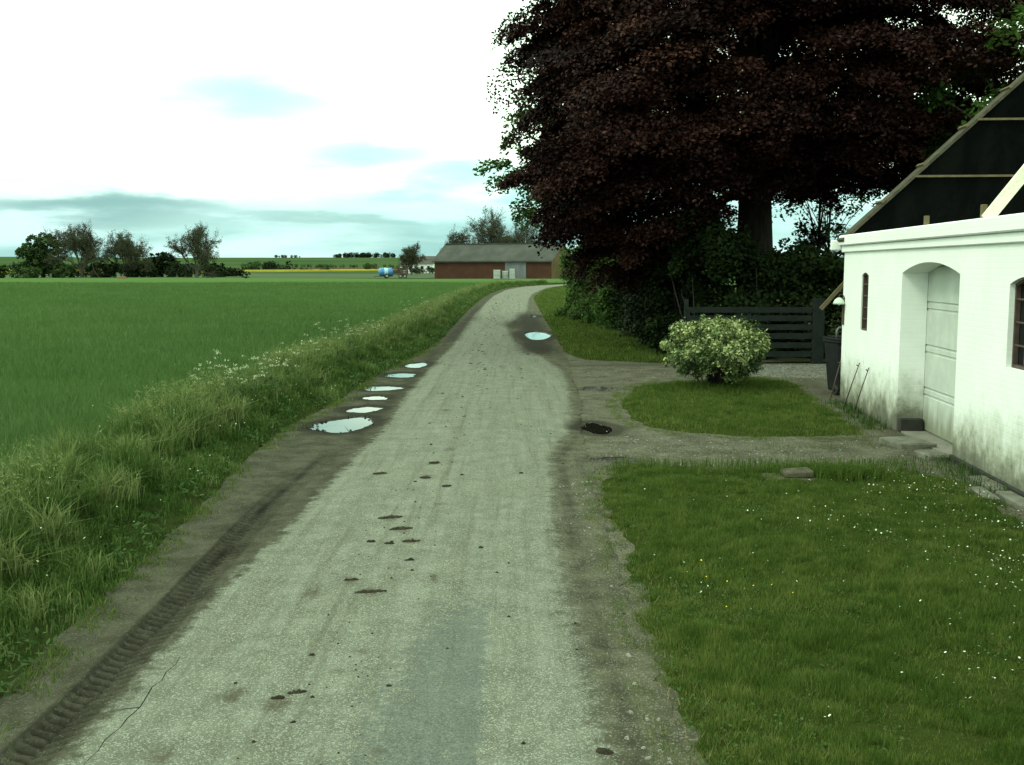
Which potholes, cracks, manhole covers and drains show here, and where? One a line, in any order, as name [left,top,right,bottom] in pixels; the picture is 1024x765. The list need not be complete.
pothole [581,422,614,434]
crack [84,657,180,765]
pothole [524,331,552,340]
pothole [305,416,374,433]
